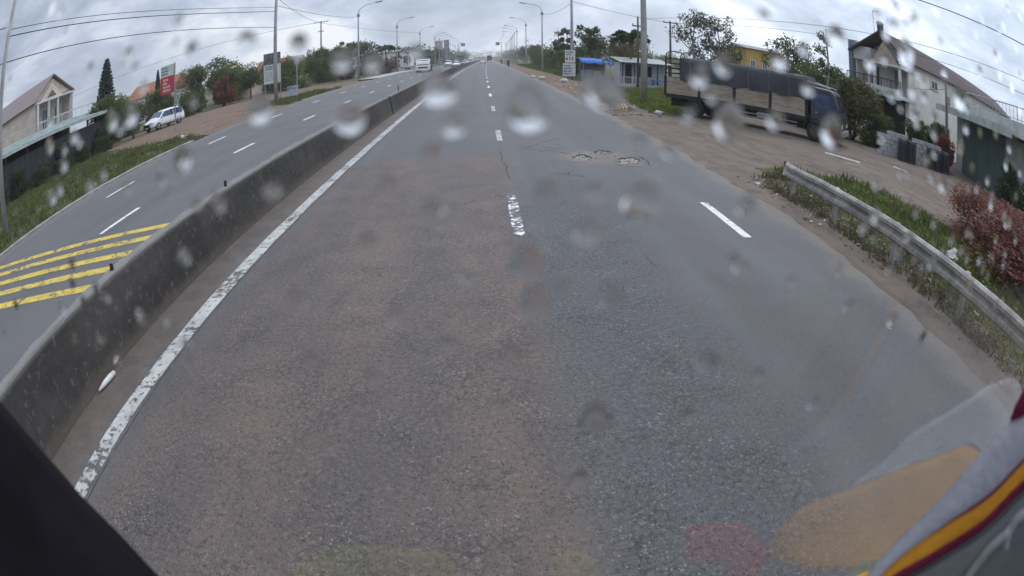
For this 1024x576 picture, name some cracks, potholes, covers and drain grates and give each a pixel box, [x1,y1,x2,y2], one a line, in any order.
pothole [608,155,646,166]
